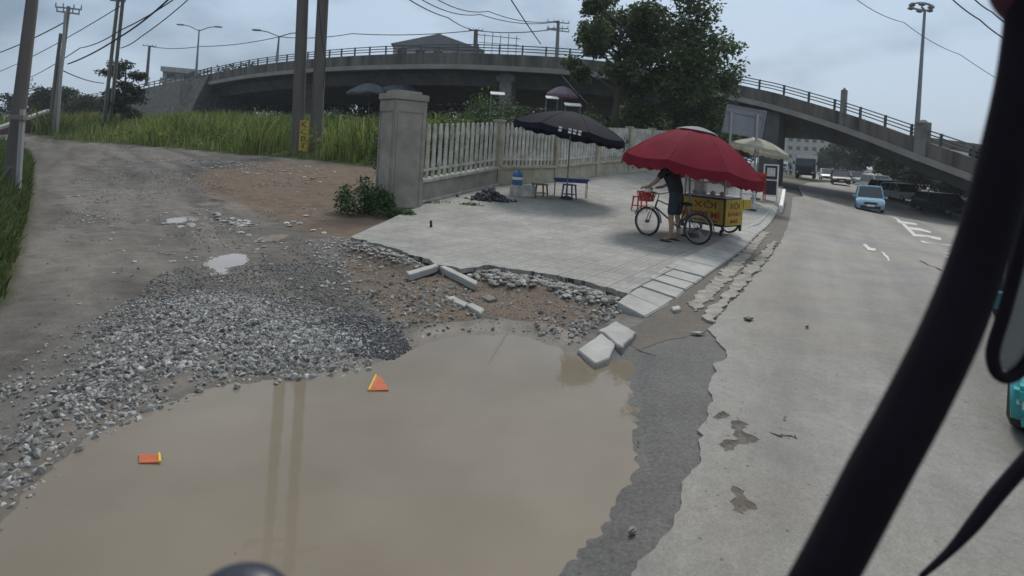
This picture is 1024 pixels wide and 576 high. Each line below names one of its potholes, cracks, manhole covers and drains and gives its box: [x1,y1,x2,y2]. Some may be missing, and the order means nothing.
pothole [0,318,691,576]
pothole [184,249,265,277]
pothole [719,417,759,452]
pothole [155,211,211,225]
pothole [729,486,757,515]
